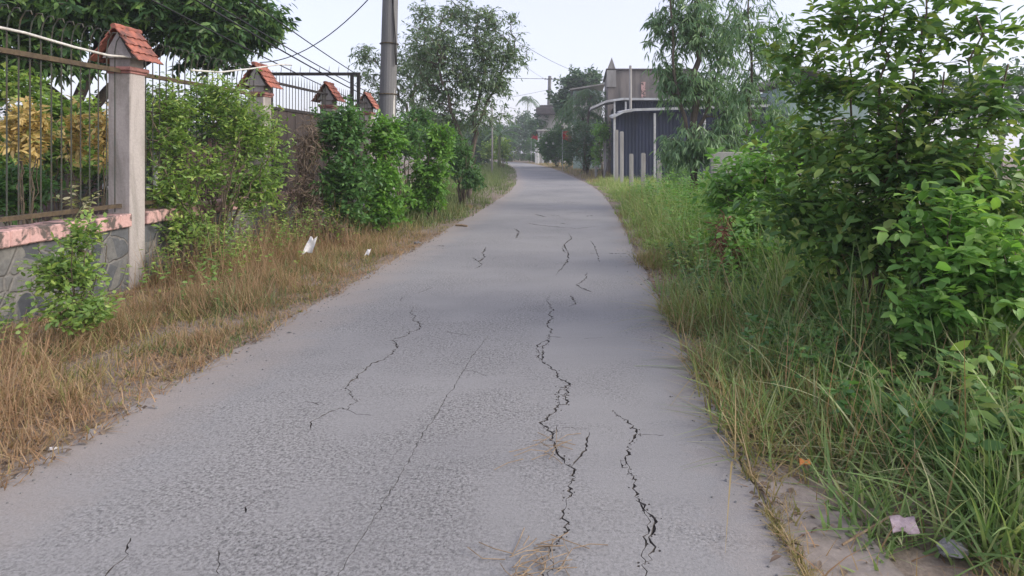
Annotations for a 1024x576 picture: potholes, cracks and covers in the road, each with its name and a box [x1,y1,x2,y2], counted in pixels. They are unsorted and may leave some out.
crack [338,337,488,575]
crack [536,302,590,576]
crack [310,287,433,429]
crack [516,215,619,306]
crack [612,410,662,576]
crack [105,539,131,576]
